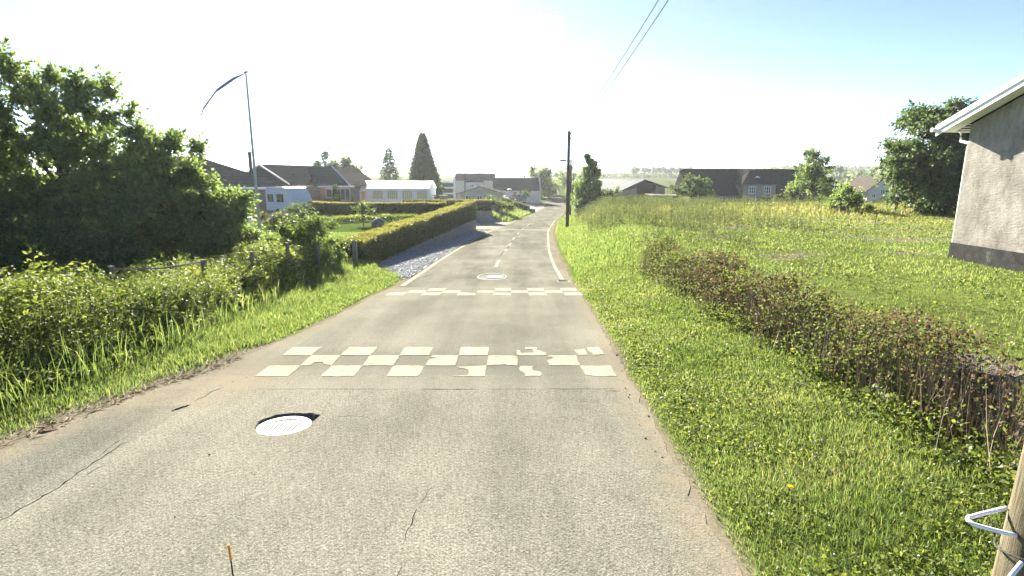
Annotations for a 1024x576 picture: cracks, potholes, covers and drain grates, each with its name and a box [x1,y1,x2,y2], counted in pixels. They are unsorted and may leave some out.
manhole cover [256,416,312,435]
crack [0,437,130,521]
